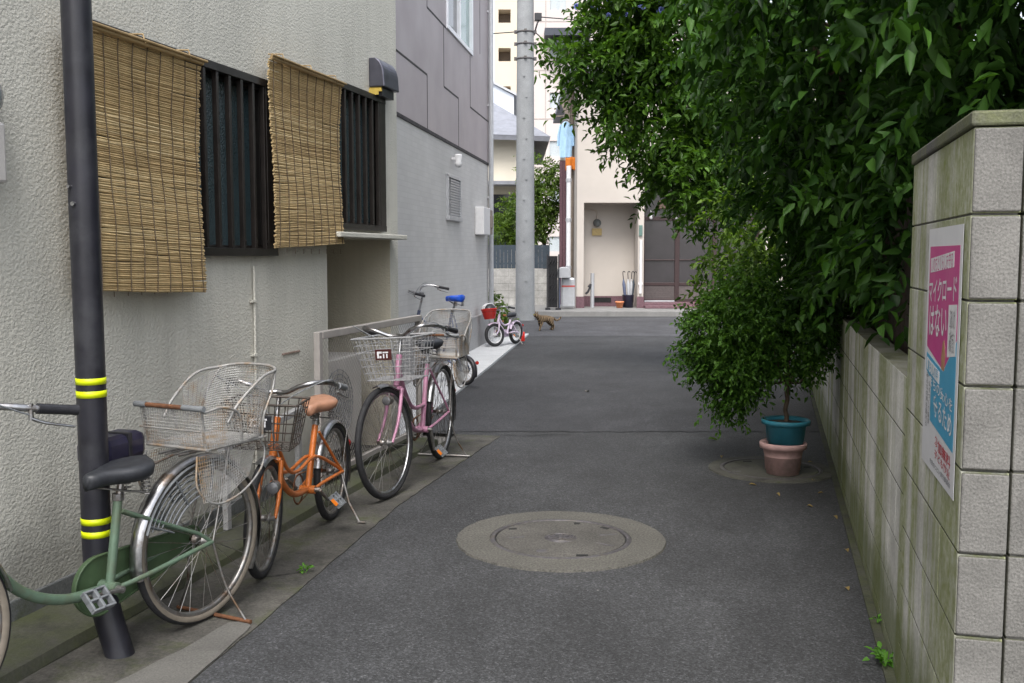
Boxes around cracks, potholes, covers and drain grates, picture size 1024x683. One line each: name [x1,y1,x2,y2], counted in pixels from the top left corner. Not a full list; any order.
manhole cover [708,456,832,484]
manhole cover [456,511,666,573]
